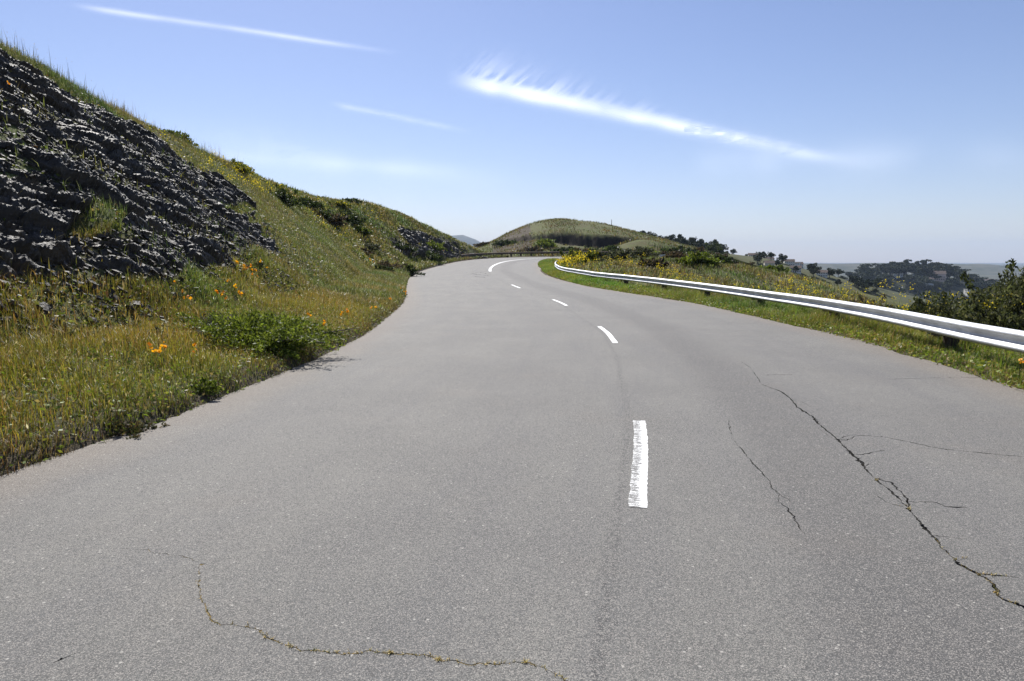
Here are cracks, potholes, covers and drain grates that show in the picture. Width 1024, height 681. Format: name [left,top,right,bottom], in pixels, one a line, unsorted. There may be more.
crack [122,548,566,681]
